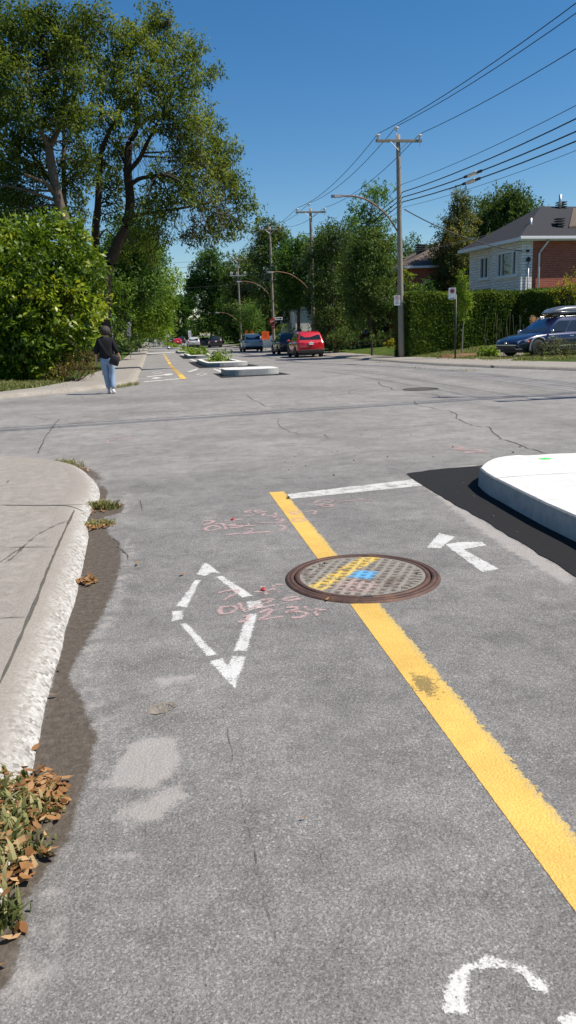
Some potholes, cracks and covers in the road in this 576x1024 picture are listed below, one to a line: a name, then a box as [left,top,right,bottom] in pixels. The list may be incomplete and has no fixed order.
manhole cover [285,554,441,604]
crack [240,394,545,453]
